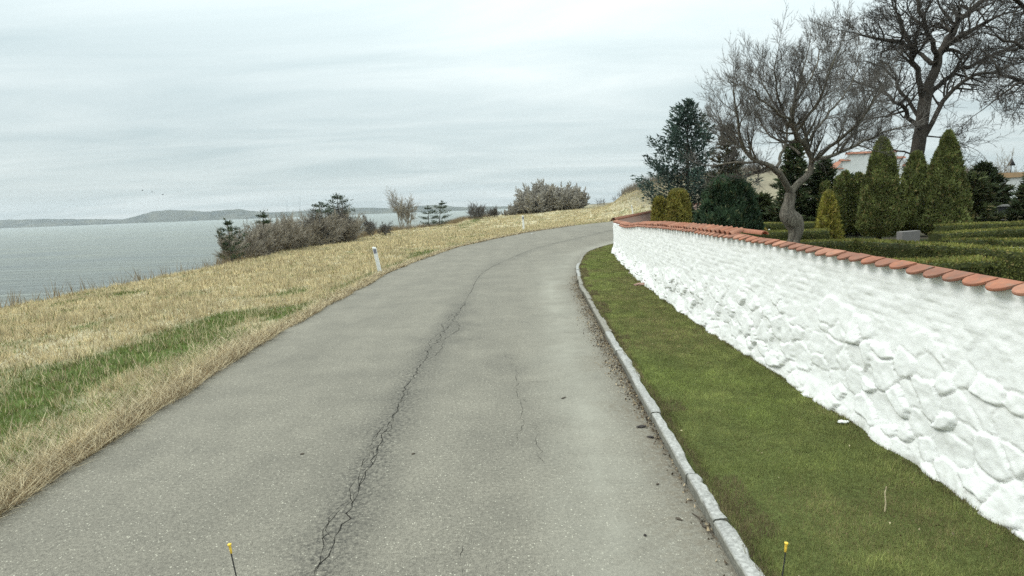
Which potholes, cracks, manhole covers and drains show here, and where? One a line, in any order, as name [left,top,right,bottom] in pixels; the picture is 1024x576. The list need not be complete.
crack [314,230,610,576]
